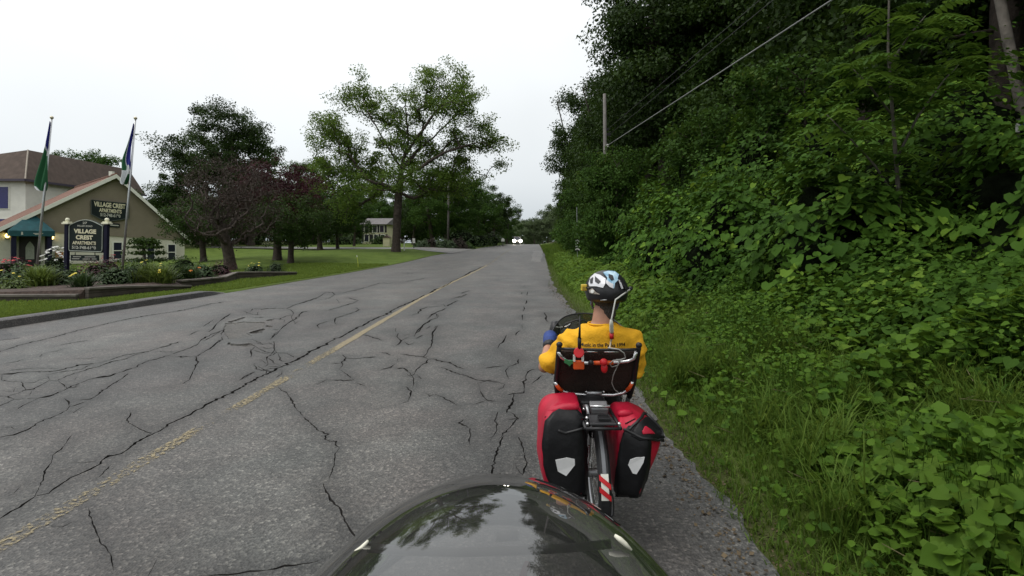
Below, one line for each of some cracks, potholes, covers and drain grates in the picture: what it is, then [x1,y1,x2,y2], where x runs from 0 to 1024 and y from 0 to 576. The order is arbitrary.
crack [206,283,389,379]
crack [0,302,230,437]
crack [279,291,541,536]
crack [54,507,113,567]
